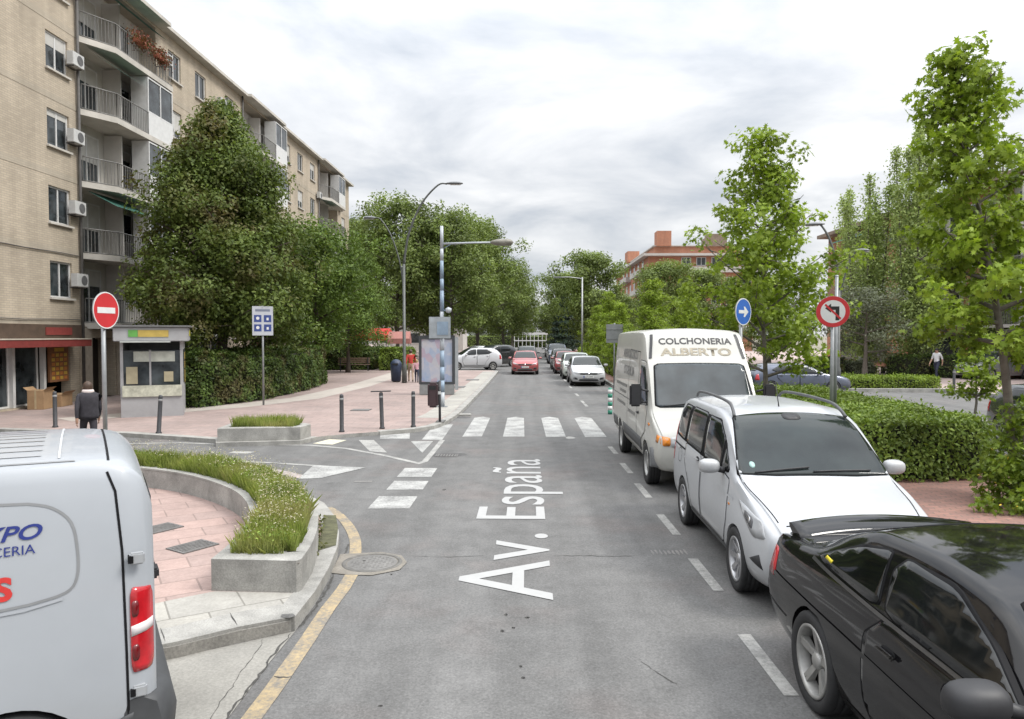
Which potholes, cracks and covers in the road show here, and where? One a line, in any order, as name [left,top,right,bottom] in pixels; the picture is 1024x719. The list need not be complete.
drain grate [166,539,219,554]
manhole cover [342,553,402,572]
drain grate [153,522,184,534]
